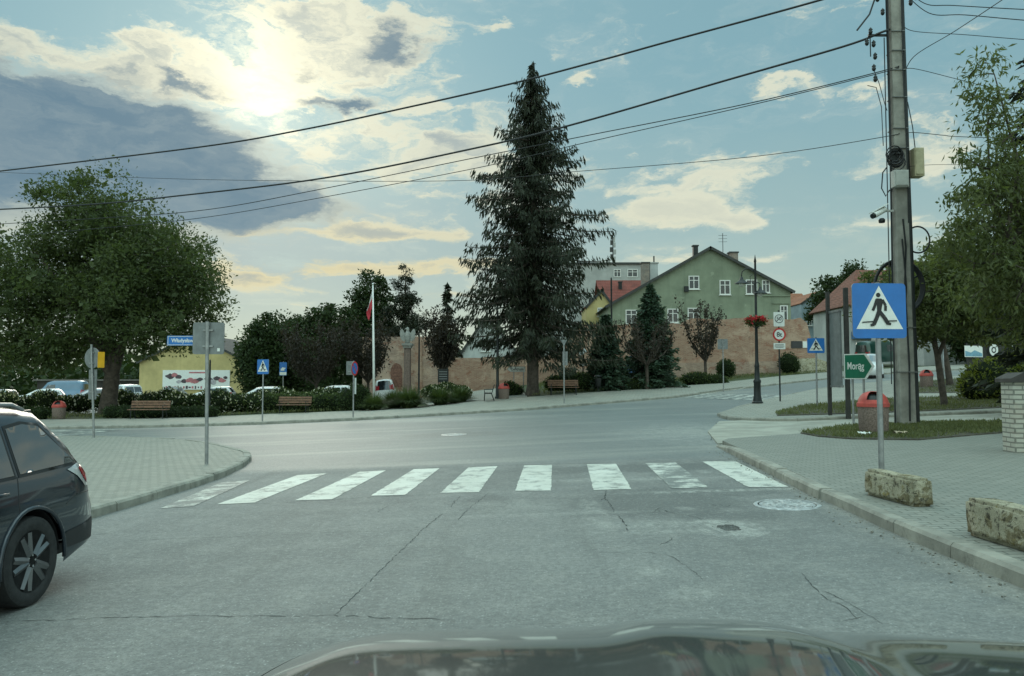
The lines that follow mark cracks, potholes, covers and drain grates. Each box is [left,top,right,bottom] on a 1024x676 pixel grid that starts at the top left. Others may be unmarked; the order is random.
manhole cover [753,499,822,511]
crack [26,494,487,621]
crack [805,577,881,623]
